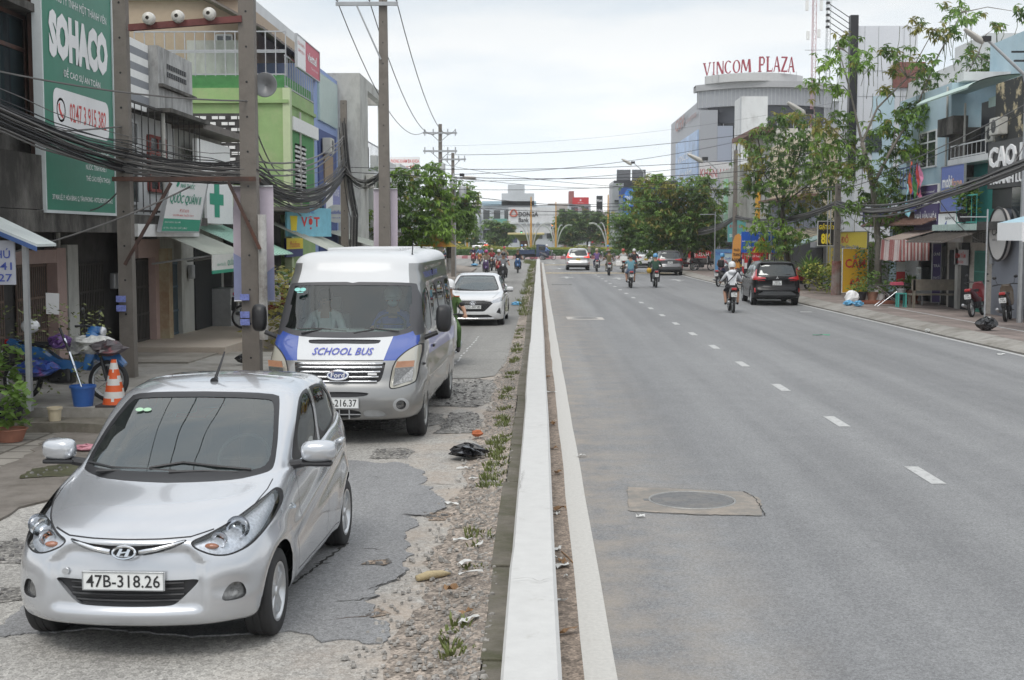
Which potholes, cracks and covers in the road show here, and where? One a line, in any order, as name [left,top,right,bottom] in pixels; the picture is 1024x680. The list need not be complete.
manhole cover [626,487,763,516]
crack [292,543,379,585]
